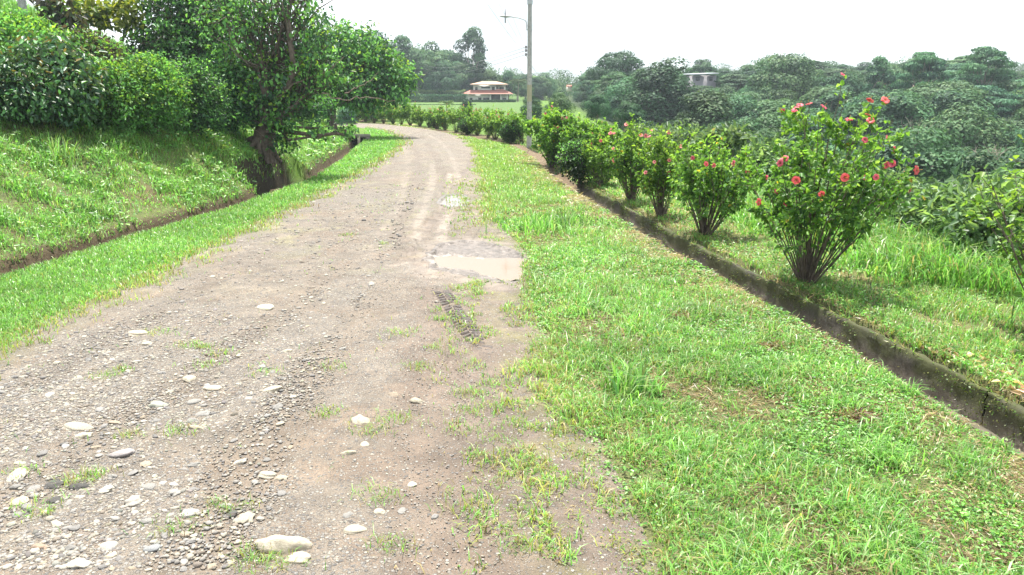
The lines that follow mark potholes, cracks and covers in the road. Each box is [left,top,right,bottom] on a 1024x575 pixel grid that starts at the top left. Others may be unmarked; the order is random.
pothole [436,193,471,208]
pothole [421,240,528,283]
